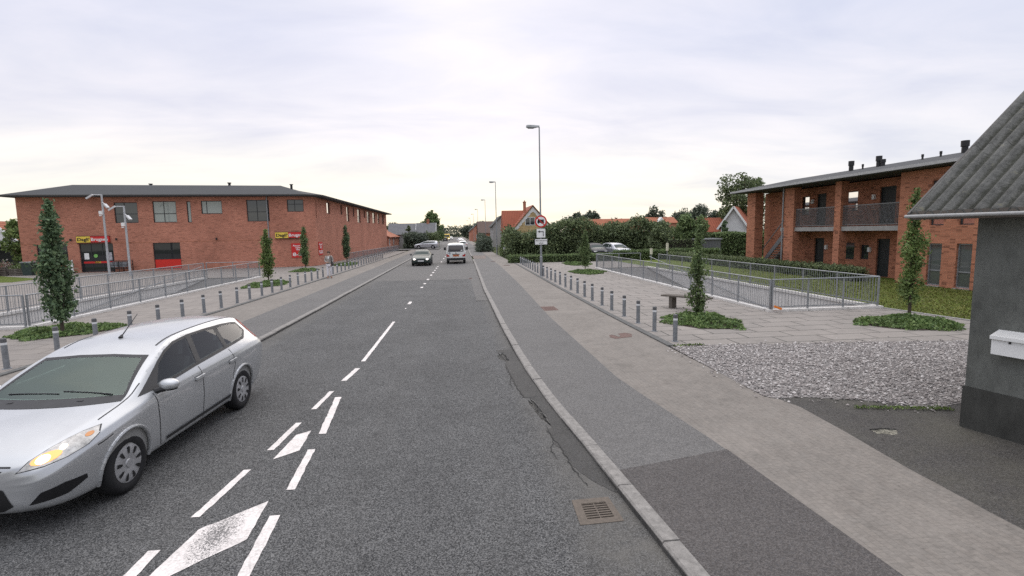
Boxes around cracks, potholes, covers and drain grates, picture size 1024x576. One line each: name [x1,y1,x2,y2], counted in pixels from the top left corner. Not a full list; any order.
crack [547,427,588,486]
drain grate [572,497,624,526]
